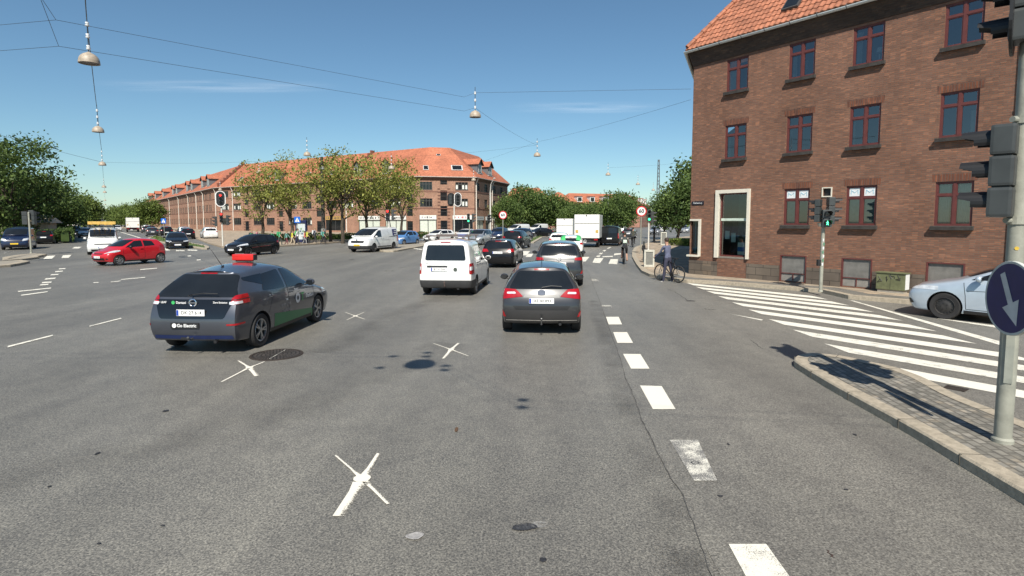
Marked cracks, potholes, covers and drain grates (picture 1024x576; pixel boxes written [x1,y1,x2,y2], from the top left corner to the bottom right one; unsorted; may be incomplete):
manhole cover [249,349,304,361]
